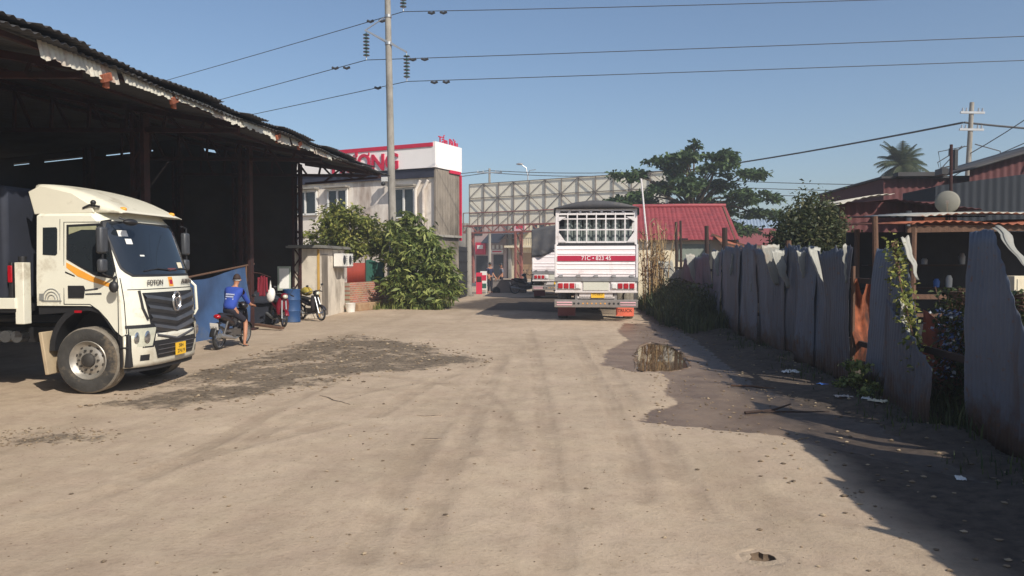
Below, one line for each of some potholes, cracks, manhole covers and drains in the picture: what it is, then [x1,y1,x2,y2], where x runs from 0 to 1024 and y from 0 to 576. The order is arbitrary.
pothole [739,549,787,566]
crack [318,395,350,405]
pothole [632,342,692,372]
